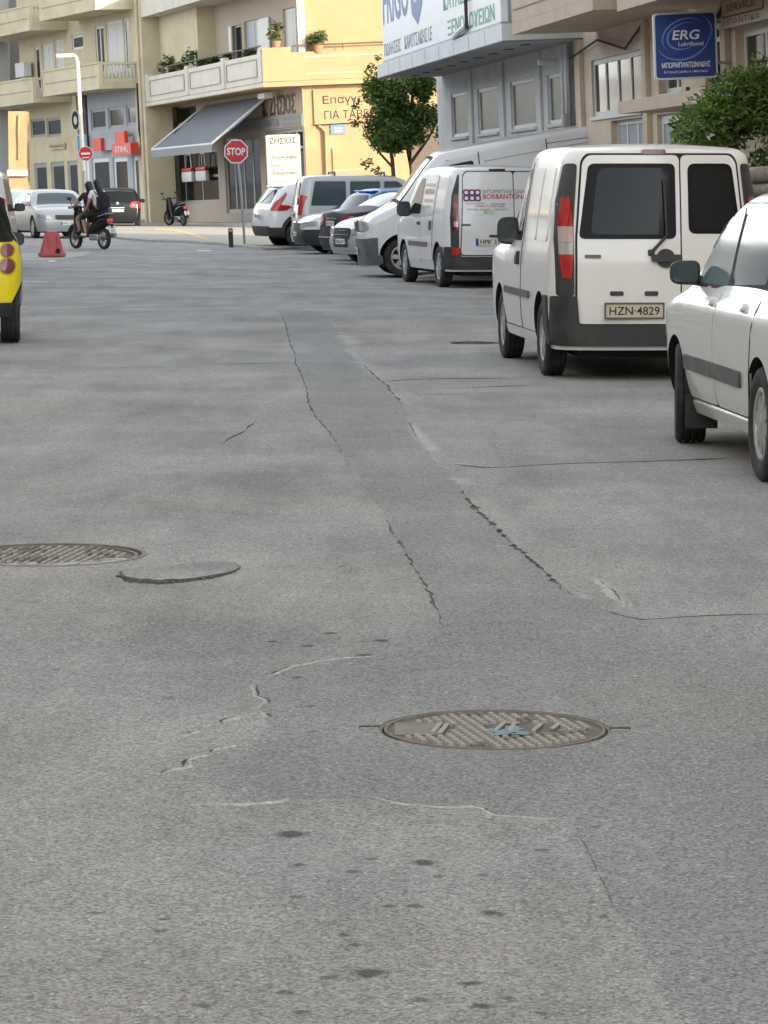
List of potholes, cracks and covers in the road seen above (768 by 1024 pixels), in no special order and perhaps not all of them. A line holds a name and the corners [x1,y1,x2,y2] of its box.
crack [225,421,255,442]
crack [184,798,289,806]
manhole cover [0,543,148,567]
manhole cover [359,709,630,750]
crack [281,315,350,467]
crack [385,518,443,628]
